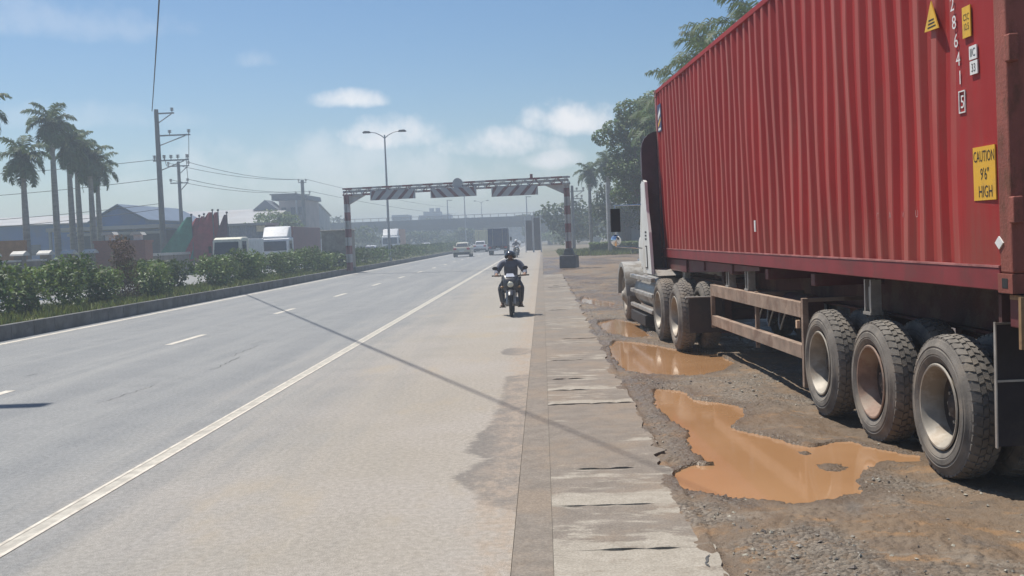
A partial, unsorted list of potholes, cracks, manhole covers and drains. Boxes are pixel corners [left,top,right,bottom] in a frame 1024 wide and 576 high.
pothole [609,341,733,376]
pothole [654,389,921,504]
pothole [597,319,650,337]
